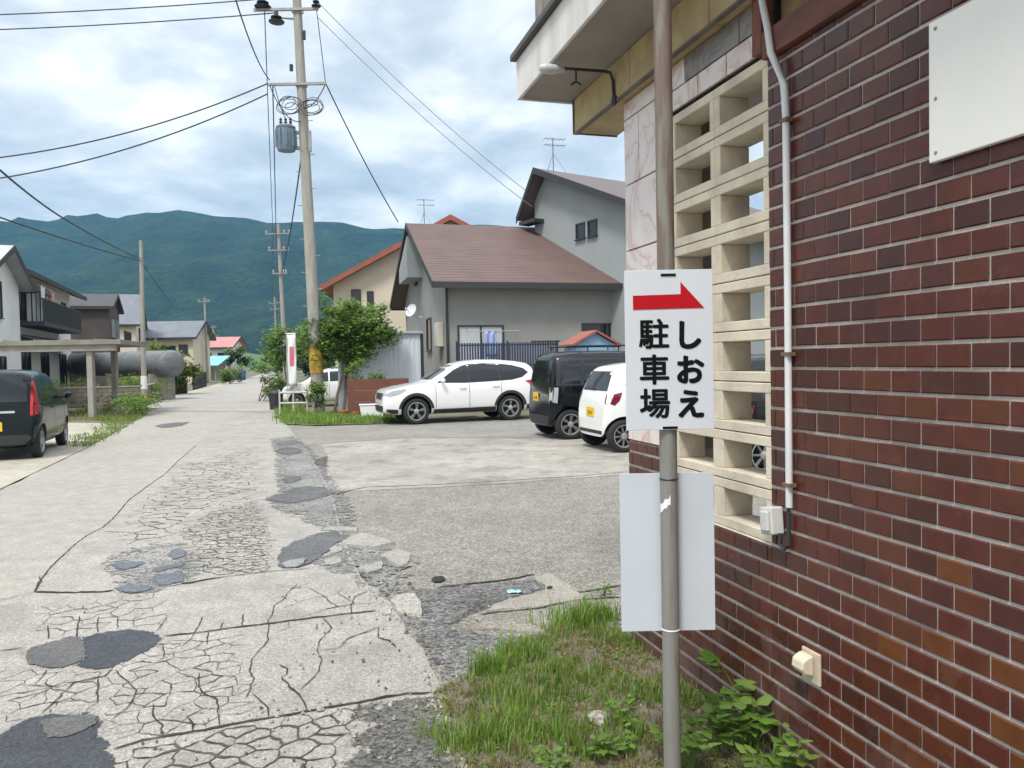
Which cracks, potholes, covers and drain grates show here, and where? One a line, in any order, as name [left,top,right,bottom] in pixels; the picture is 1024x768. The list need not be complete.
crack [1,566,411,768]
crack [104,447,276,577]
